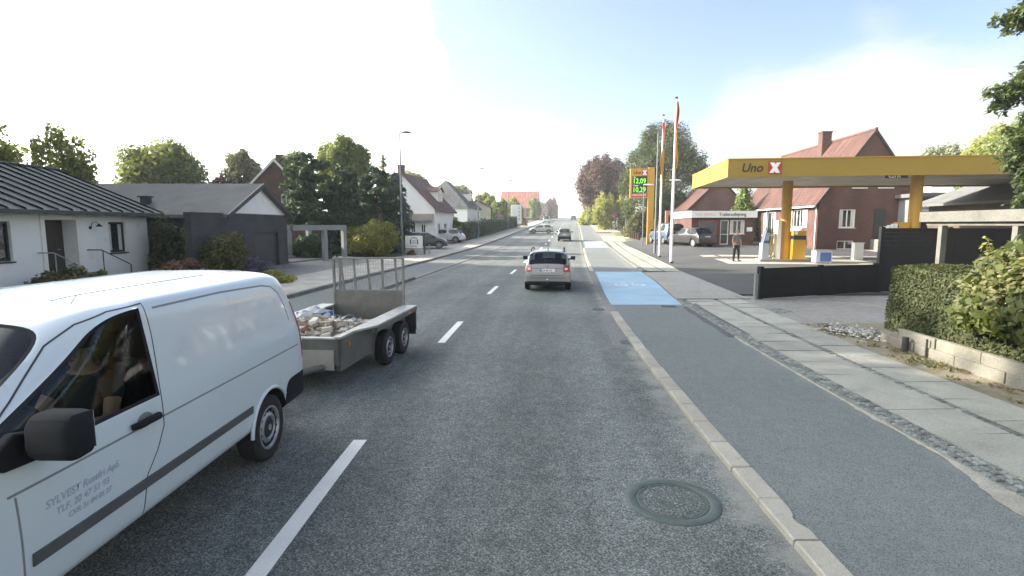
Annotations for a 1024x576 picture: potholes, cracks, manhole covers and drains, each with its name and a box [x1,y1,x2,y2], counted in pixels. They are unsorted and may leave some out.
manhole cover [625,479,722,526]
